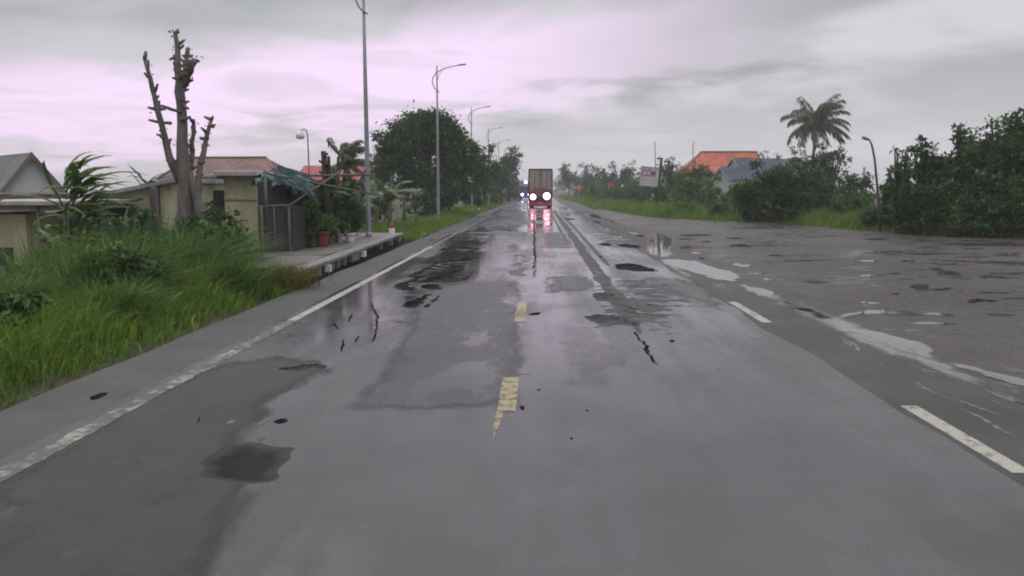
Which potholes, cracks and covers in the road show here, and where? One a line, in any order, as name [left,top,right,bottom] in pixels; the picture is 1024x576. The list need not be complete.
crack [333,302,379,352]
pothole [584,315,639,326]
pothole [393,277,423,288]
pothole [404,294,432,308]
pothole [615,263,657,272]
pothole [279,364,327,372]
crack [620,275,677,365]
